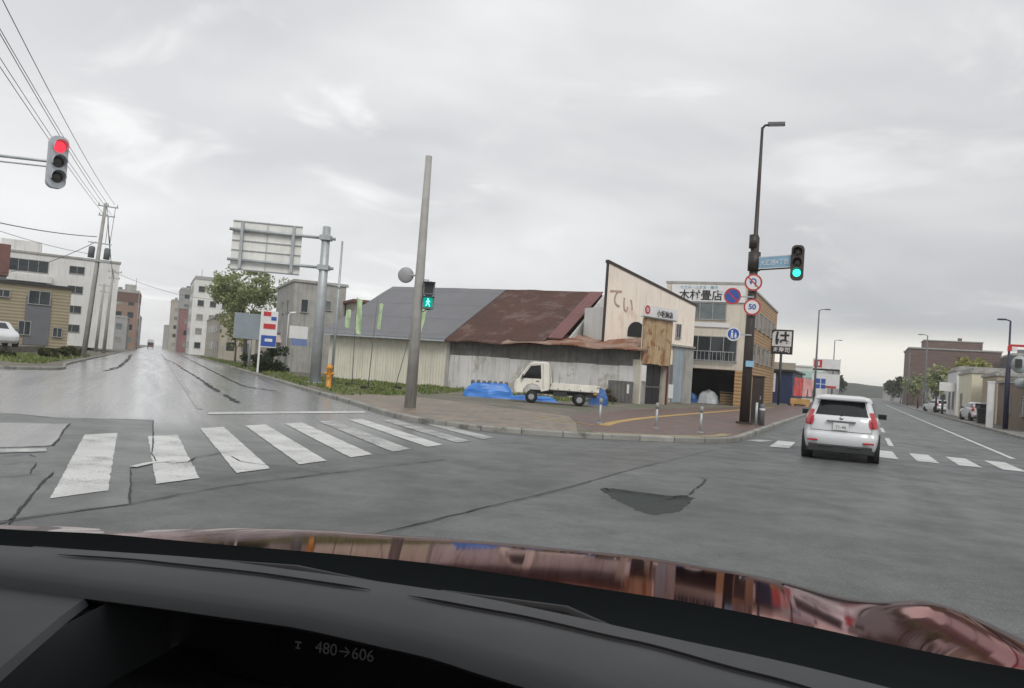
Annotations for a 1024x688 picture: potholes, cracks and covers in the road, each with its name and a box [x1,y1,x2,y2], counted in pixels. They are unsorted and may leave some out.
crack [396,462,658,529]
pothole [600,488,695,515]
